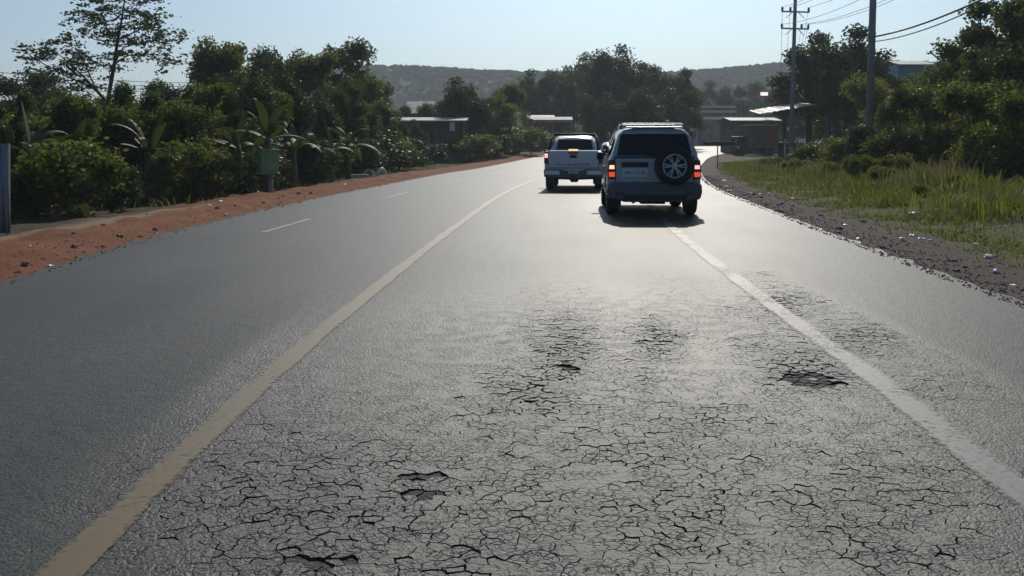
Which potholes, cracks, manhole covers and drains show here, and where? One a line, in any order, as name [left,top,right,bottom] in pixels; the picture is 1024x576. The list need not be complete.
crack [746,406,1024,576]
crack [431,272,620,445]
crack [702,271,1022,423]
pothole [397,471,448,481]
crack [67,350,857,576]
pothole [400,489,447,500]
crack [600,274,715,402]
pothole [282,554,359,575]
pothole [780,371,849,390]
pothole [556,360,581,372]
